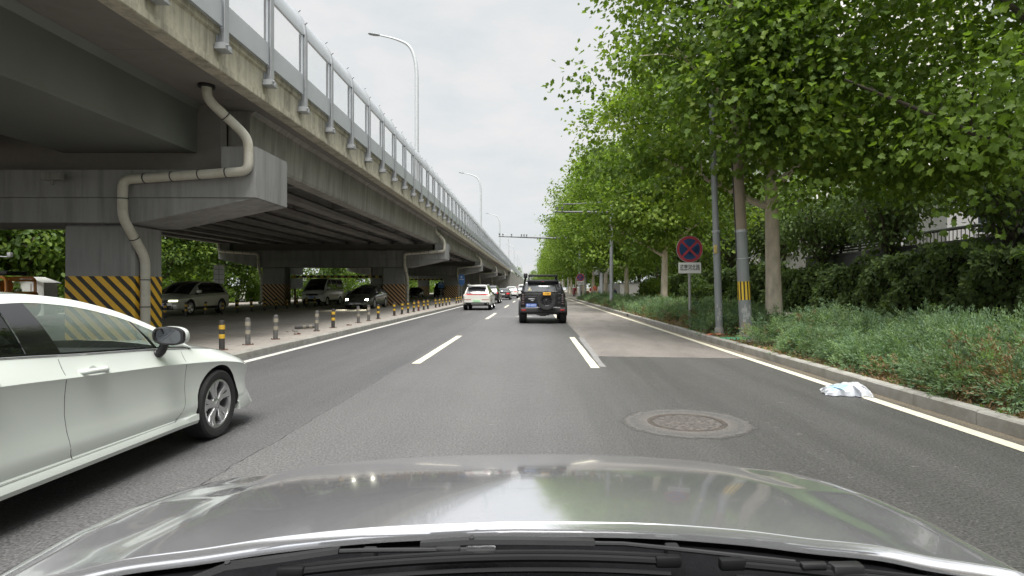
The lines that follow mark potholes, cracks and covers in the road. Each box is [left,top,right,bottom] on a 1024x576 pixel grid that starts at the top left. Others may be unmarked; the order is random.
manhole cover [623,409,756,438]
